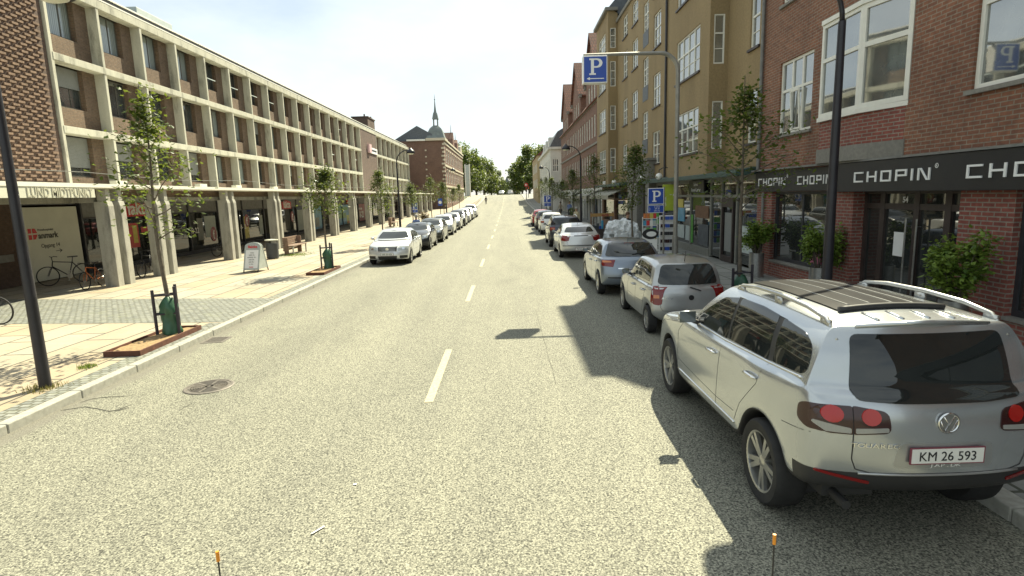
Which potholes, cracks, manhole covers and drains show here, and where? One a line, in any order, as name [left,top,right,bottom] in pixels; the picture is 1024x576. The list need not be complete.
drain grate [200,336,233,344]
crack [65,395,132,412]
manhole cover [183,379,235,394]
